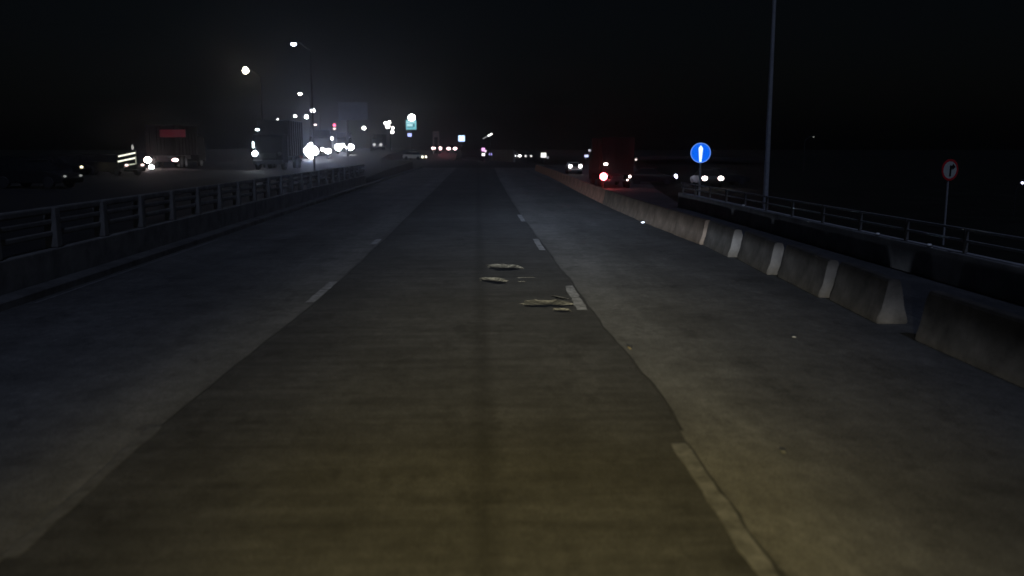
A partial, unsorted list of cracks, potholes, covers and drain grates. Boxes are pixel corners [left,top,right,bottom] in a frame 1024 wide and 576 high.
pothole [521,299,574,307]
